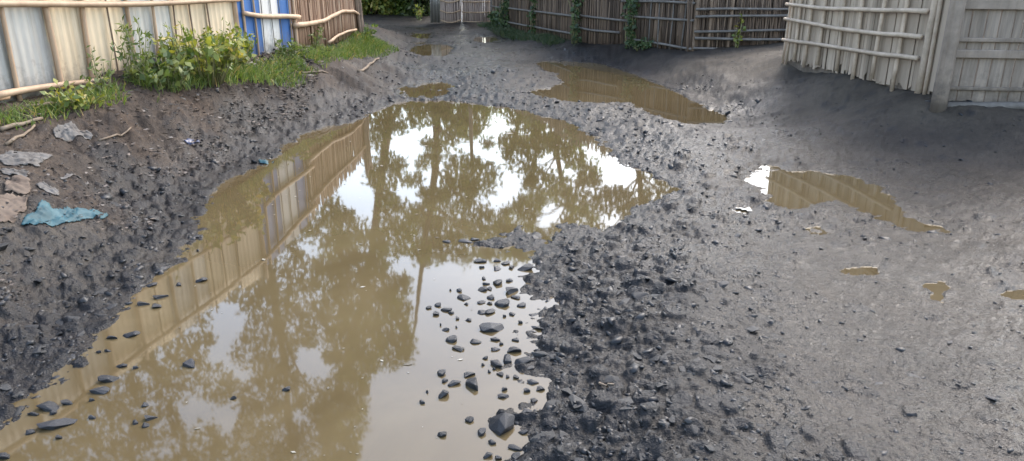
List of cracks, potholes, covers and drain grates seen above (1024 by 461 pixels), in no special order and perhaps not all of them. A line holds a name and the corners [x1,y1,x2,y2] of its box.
pothole [0,94,705,461]
pothole [523,59,741,126]
pothole [387,78,463,99]
pothole [729,159,982,240]
